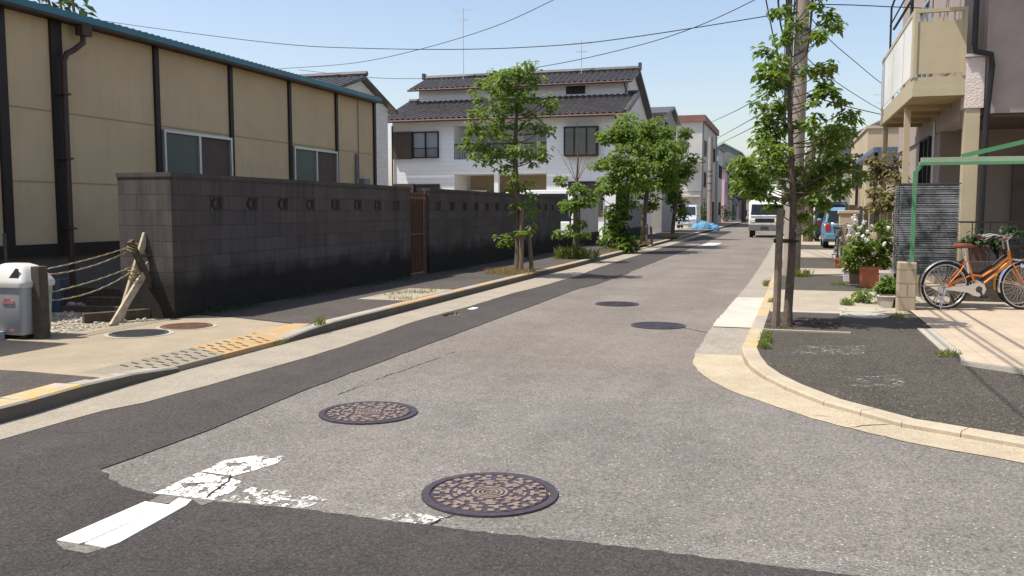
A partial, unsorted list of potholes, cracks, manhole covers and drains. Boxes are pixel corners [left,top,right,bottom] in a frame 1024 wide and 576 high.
manhole cover [156,322,218,330]
manhole cover [104,329,174,338]
manhole cover [421,472,558,518]
crack [202,474,231,498]
manhole cover [318,401,417,425]
manhole cover [631,322,686,330]
